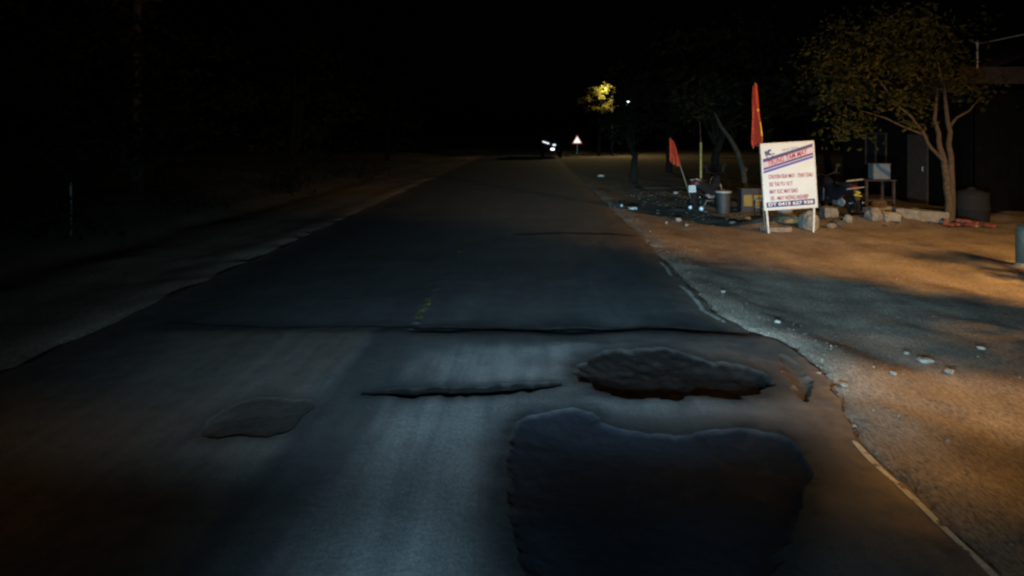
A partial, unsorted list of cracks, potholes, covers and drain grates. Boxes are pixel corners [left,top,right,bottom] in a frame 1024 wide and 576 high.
pothole [573,347,777,401]
pothole [778,355,815,402]
pothole [200,397,316,440]
pothole [505,407,814,576]
